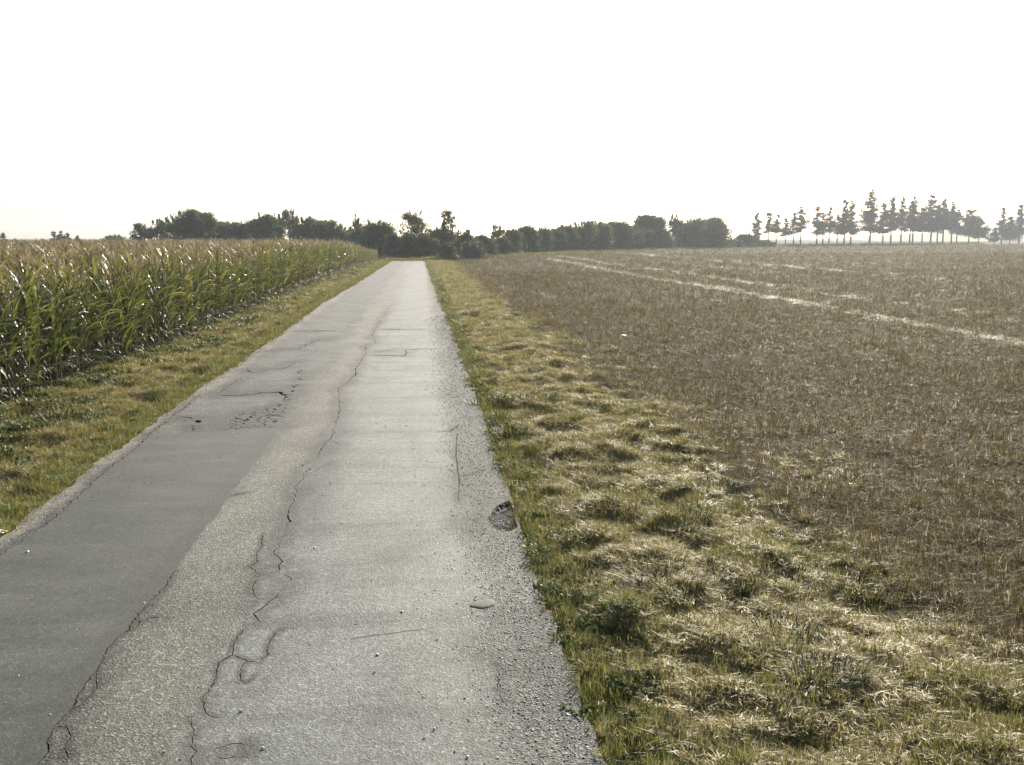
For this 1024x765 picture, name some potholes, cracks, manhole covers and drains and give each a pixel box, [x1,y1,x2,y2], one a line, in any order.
crack [443,426,481,501]
pothole [487,500,517,532]
crack [190,316,442,765]
